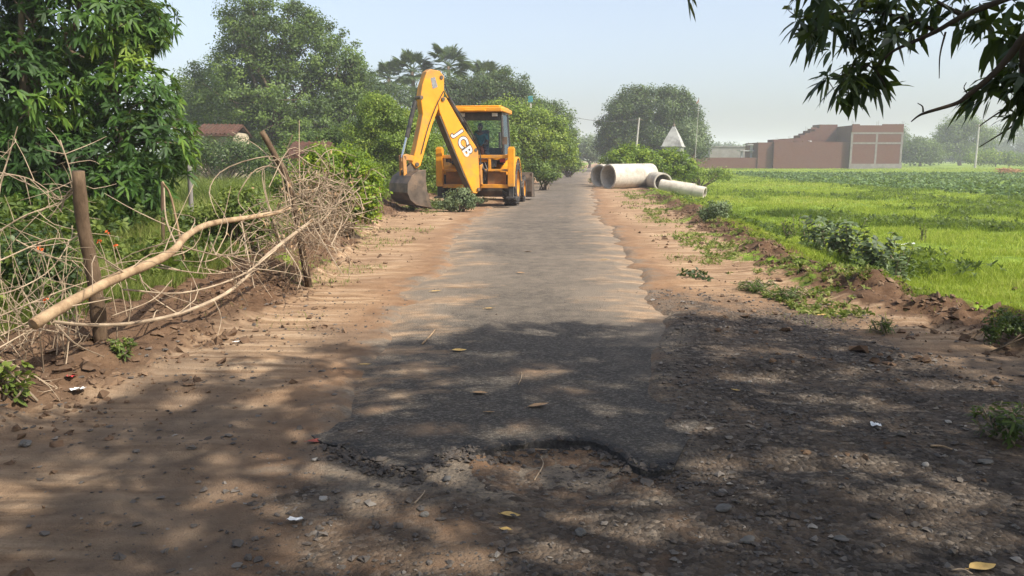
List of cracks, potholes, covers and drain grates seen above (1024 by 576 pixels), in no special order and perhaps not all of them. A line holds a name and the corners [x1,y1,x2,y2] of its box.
pothole [467,438,679,512]
